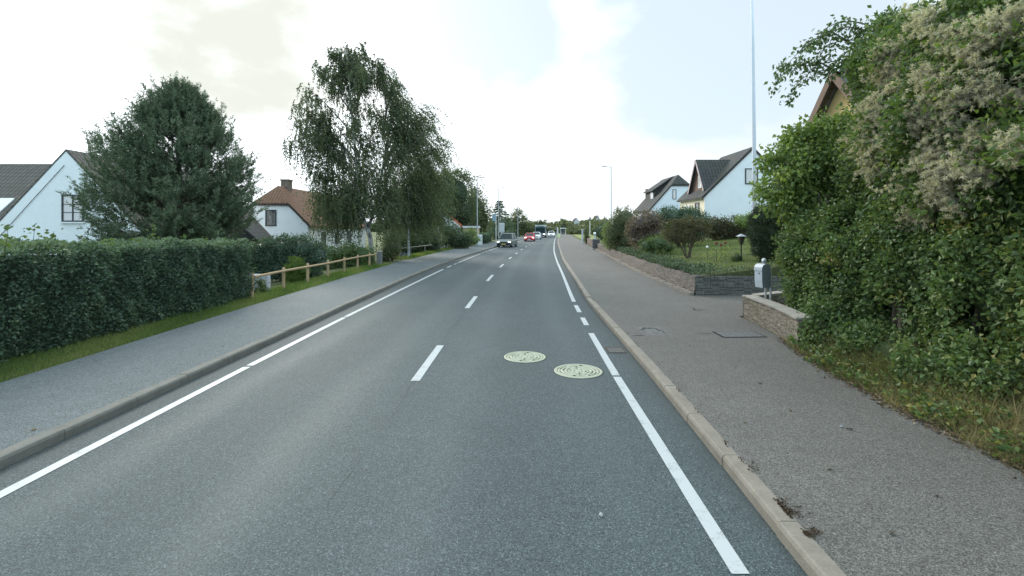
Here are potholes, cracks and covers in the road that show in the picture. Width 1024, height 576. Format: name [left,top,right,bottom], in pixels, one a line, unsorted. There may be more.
manhole cover [553,364,604,379]
manhole cover [503,351,547,363]
pothole [636,327,673,336]
